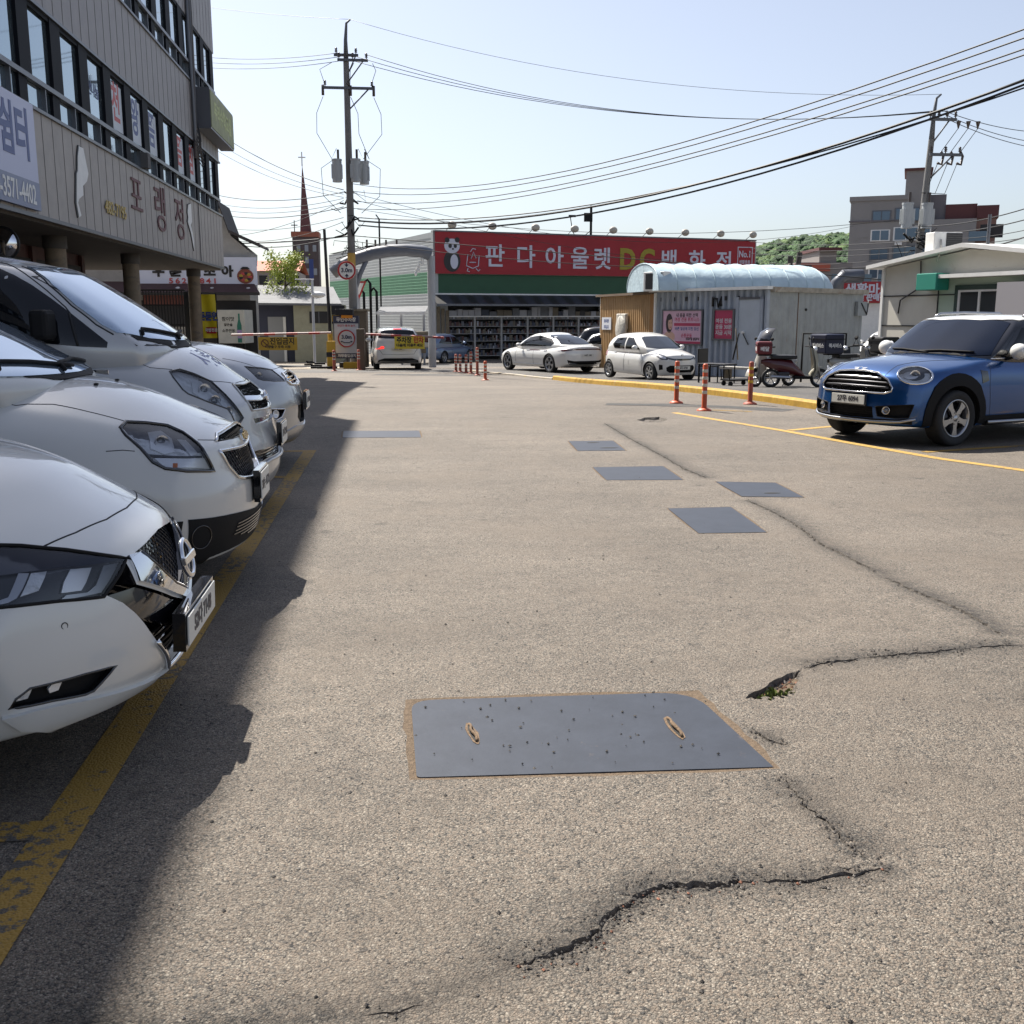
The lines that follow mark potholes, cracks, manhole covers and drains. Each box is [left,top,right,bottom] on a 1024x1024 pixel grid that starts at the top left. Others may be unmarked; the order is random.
manhole cover [568,440,627,451]
manhole cover [666,507,768,534]
manhole cover [592,466,684,480]
pothole [745,670,803,699]
crack [363,772,890,1017]
manhole cover [403,690,779,780]
manhole cover [714,481,806,498]
